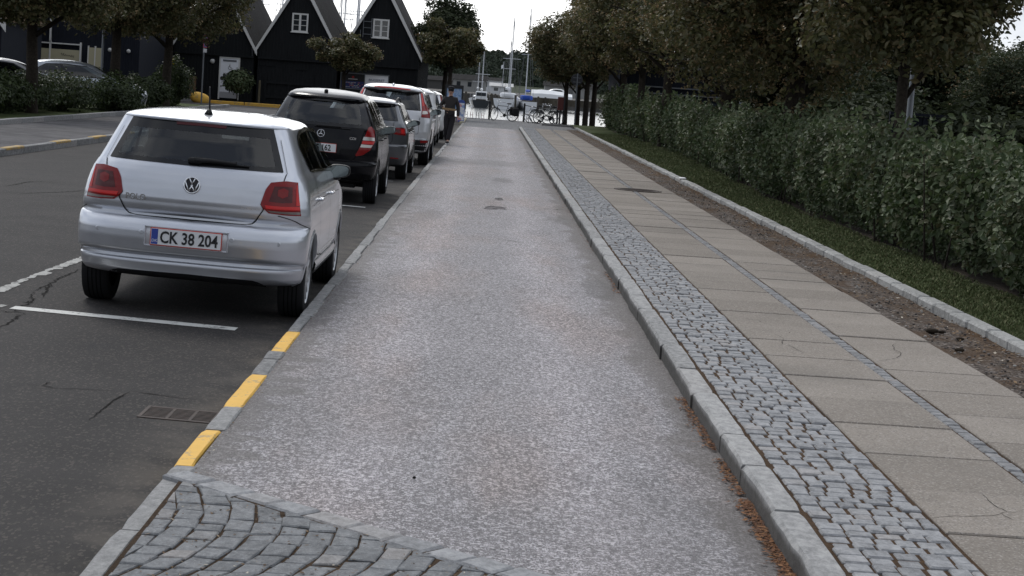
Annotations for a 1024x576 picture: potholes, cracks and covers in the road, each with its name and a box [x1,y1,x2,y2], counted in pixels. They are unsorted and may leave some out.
crack [0,269,78,327]
drain grate [137,405,219,424]
crack [43,382,195,420]
